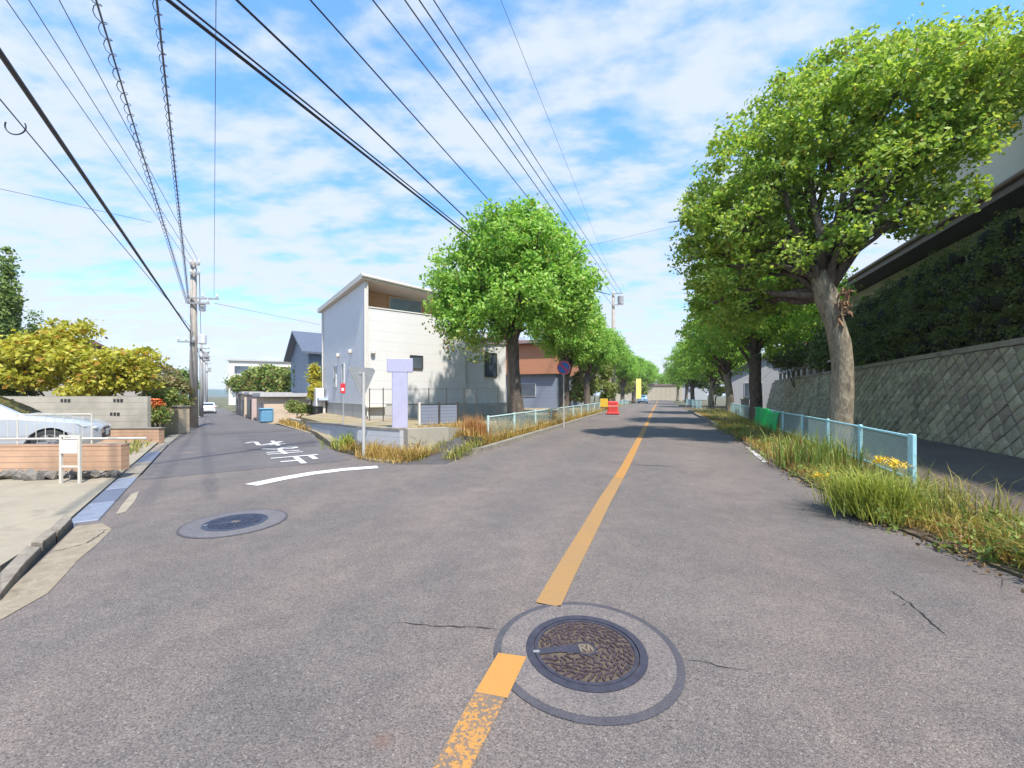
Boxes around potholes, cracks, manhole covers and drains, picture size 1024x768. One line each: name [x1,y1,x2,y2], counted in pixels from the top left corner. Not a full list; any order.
crack [893,591,947,635]
manhole cover [176,509,288,539]
manhole cover [494,602,686,726]
